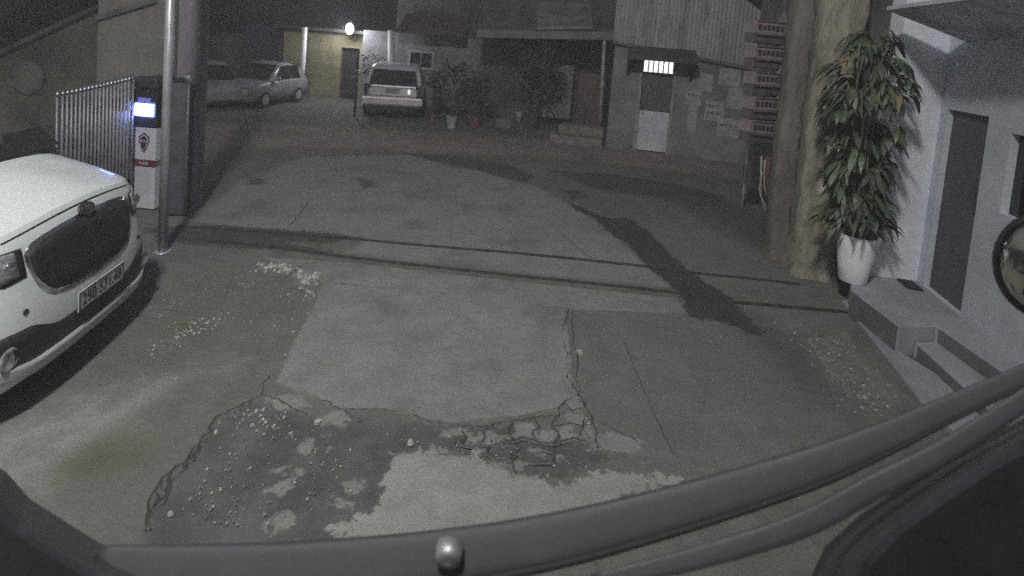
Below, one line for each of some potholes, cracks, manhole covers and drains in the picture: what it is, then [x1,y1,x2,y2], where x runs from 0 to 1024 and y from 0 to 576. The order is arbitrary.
crack [436,305,677,473]
